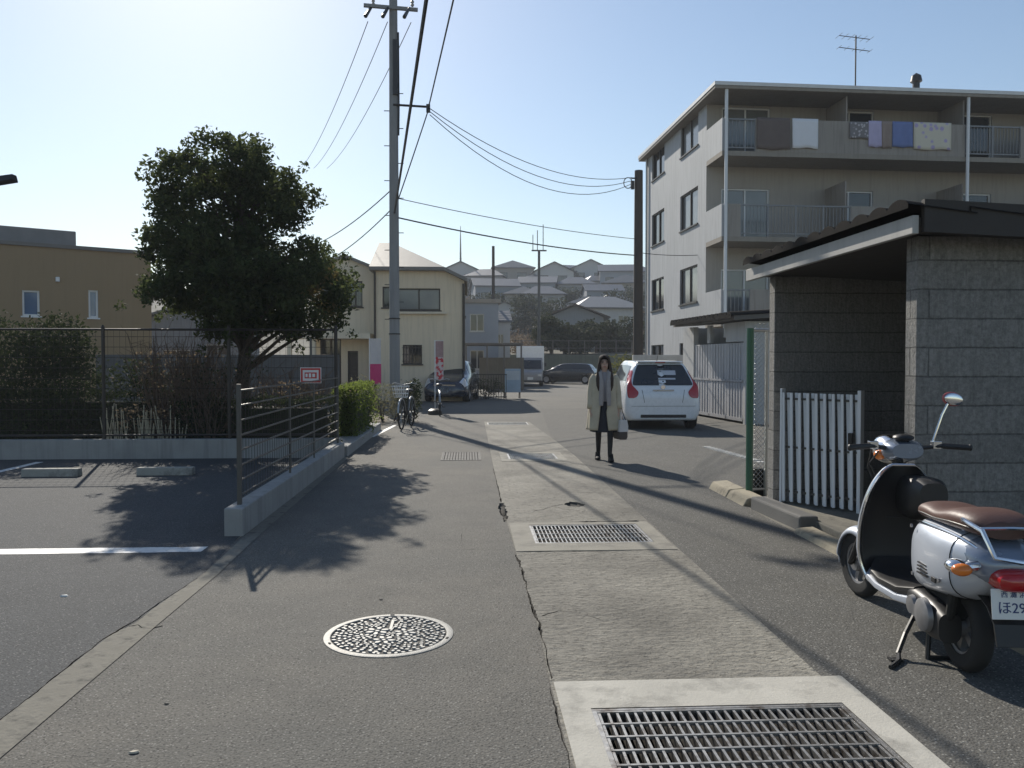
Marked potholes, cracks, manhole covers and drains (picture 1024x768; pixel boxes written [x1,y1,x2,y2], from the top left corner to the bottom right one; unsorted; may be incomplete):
drain grate [529,524,654,543]
drain grate [591,703,912,768]
pothole [498,503,508,522]
crack [515,555,598,768]
manhole cover [323,614,453,658]
drain grate [441,452,481,460]
